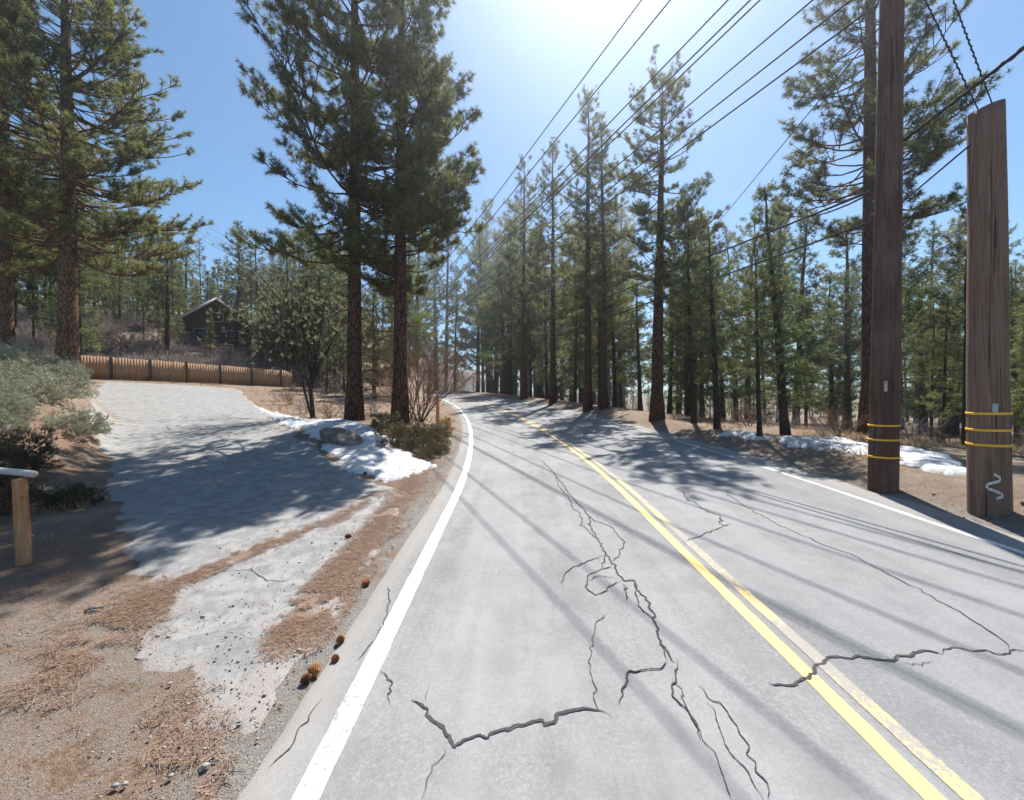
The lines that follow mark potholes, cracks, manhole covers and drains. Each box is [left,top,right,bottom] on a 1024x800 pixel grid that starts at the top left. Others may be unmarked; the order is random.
crack [354,588,393,704]
crack [412,461,1024,800]
crack [269,699,322,767]
